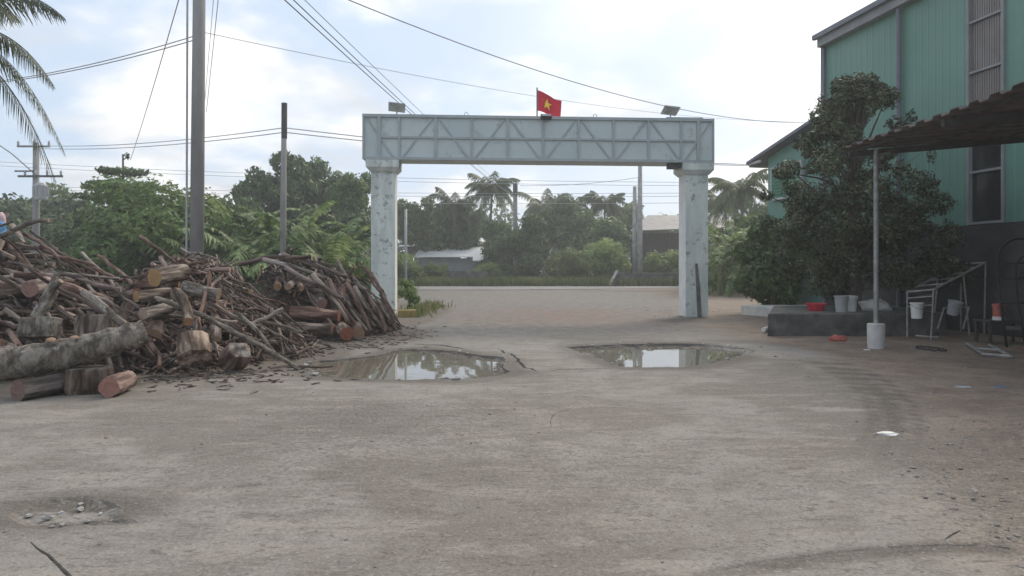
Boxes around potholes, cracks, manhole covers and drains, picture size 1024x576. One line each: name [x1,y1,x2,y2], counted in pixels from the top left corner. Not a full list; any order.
pothole [566,342,757,368]
crack [498,349,612,371]
pothole [303,348,510,380]
pothole [5,496,138,529]
